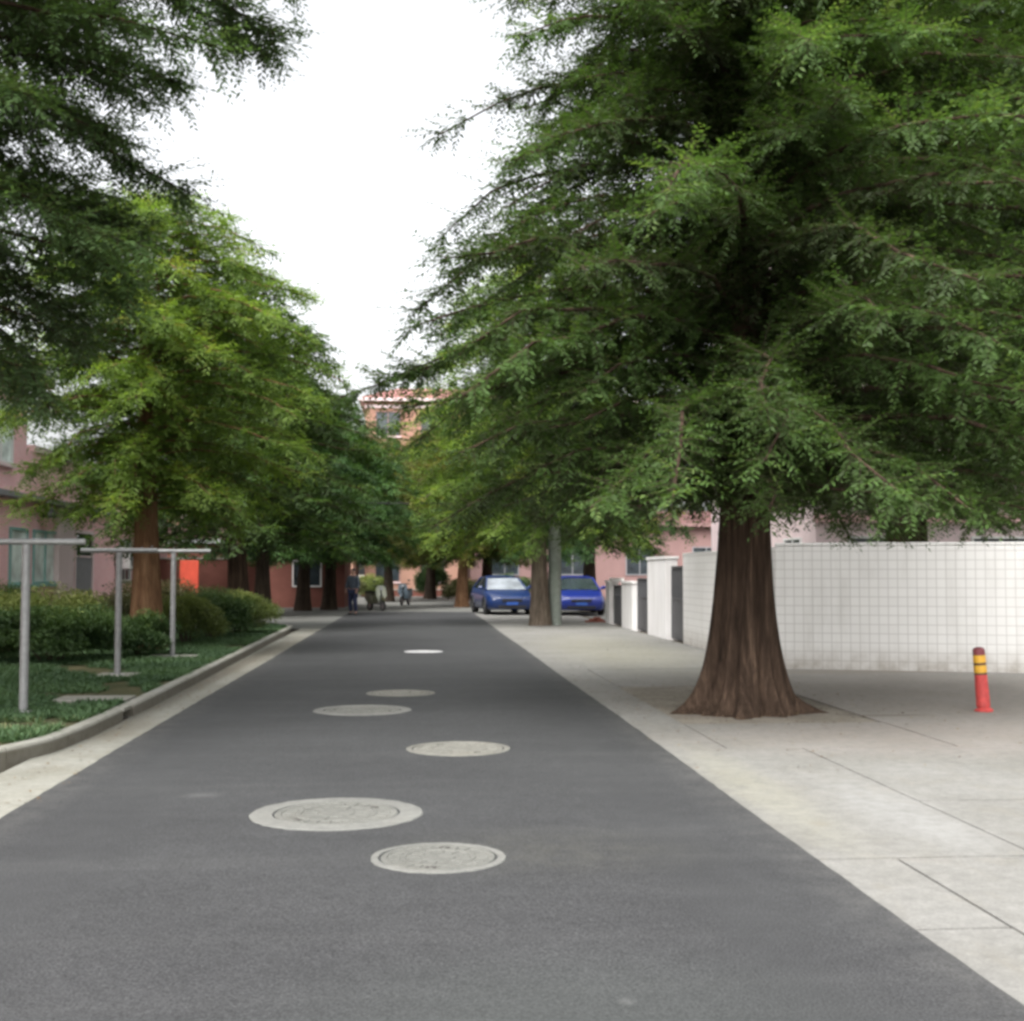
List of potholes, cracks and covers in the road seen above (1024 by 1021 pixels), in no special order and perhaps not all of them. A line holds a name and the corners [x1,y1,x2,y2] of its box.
manhole cover [371,842,506,874]
manhole cover [249,798,423,831]
manhole cover [406,741,510,756]
manhole cover [313,705,411,716]
